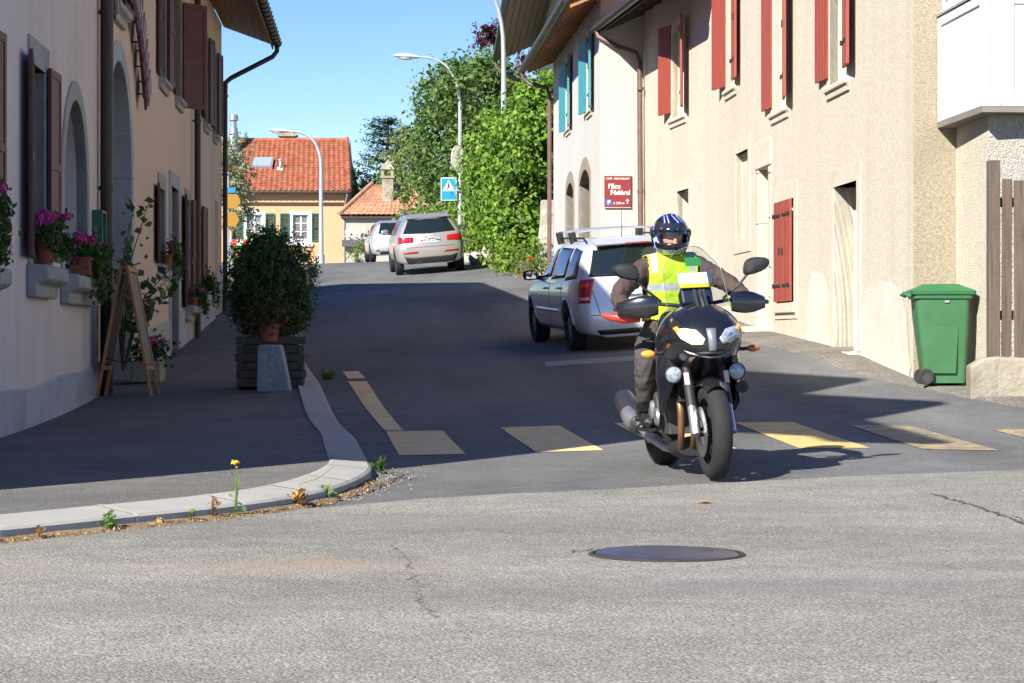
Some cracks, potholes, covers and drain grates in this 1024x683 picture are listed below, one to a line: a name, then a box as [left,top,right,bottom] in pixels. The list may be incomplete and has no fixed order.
crack [390,544,441,618]
crack [930,493,1024,524]
manhole cover [588,545,746,562]
